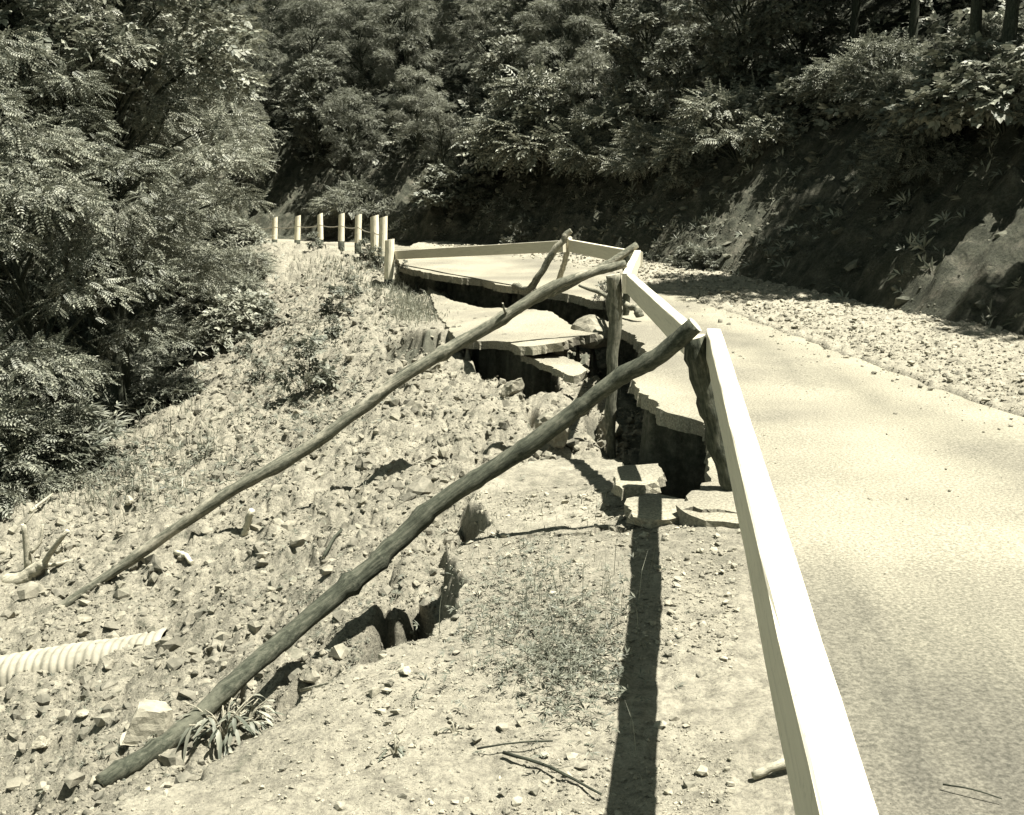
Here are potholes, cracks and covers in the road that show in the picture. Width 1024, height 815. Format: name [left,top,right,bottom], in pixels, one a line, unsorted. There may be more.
crack [399,272,644,416]
pothole [622,409,707,499]
pothole [616,398,643,448]
